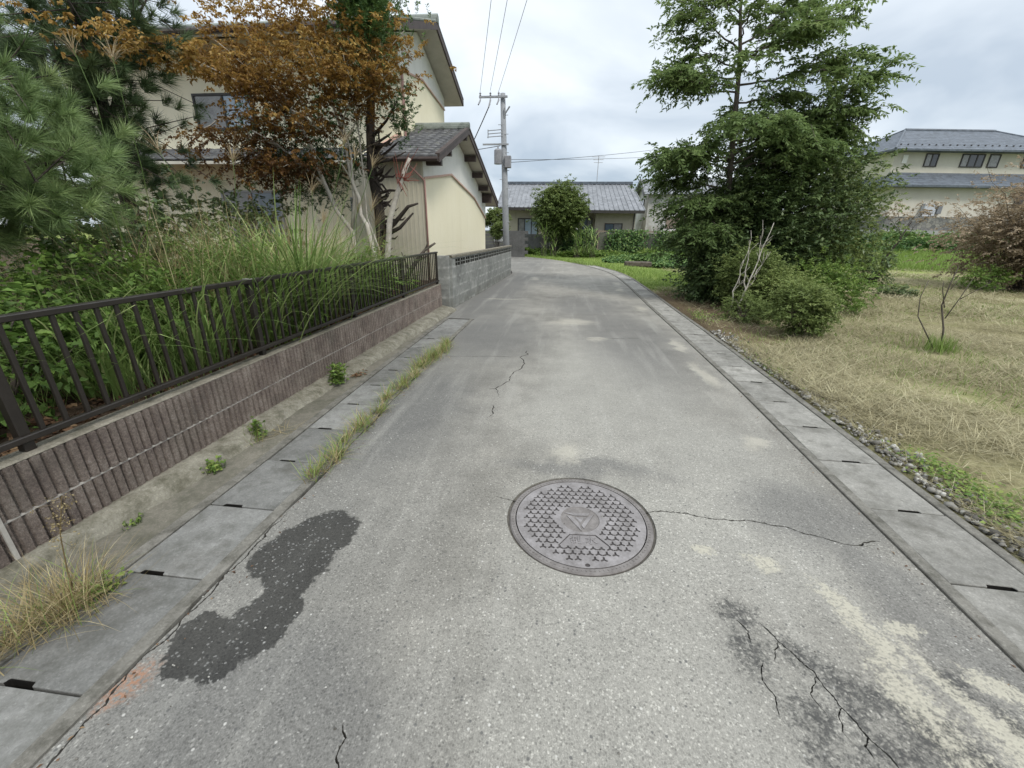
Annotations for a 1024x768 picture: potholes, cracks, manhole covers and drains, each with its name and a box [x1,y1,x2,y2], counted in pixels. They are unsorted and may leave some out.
manhole cover [507,479,656,577]
crack [646,511,879,546]
crack [736,620,899,768]
crack [335,726,347,768]
